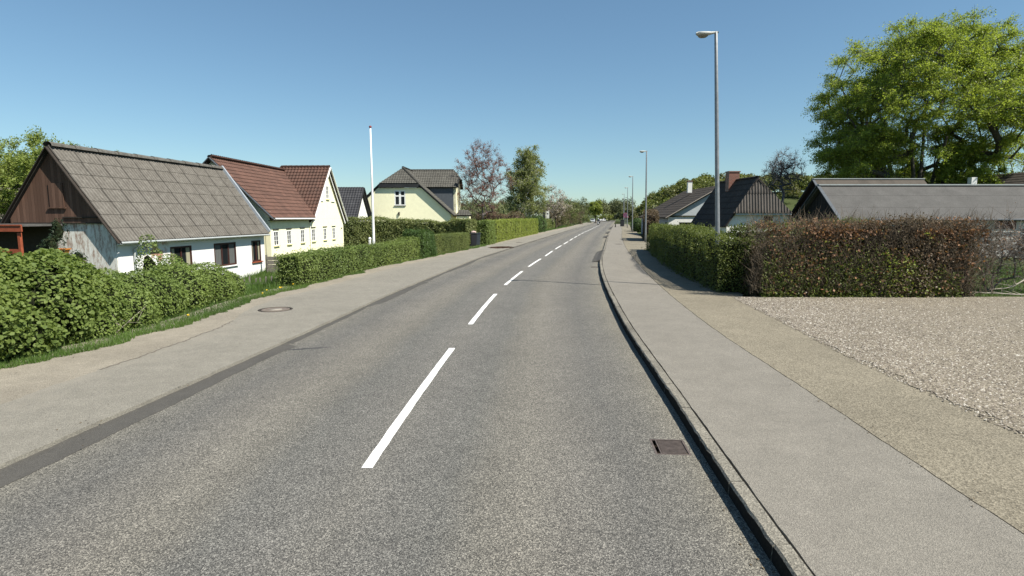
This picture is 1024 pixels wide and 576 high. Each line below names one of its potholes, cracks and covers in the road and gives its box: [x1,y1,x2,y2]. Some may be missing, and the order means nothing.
crack [100,321,232,370]
drain grate [649,439,691,455]
